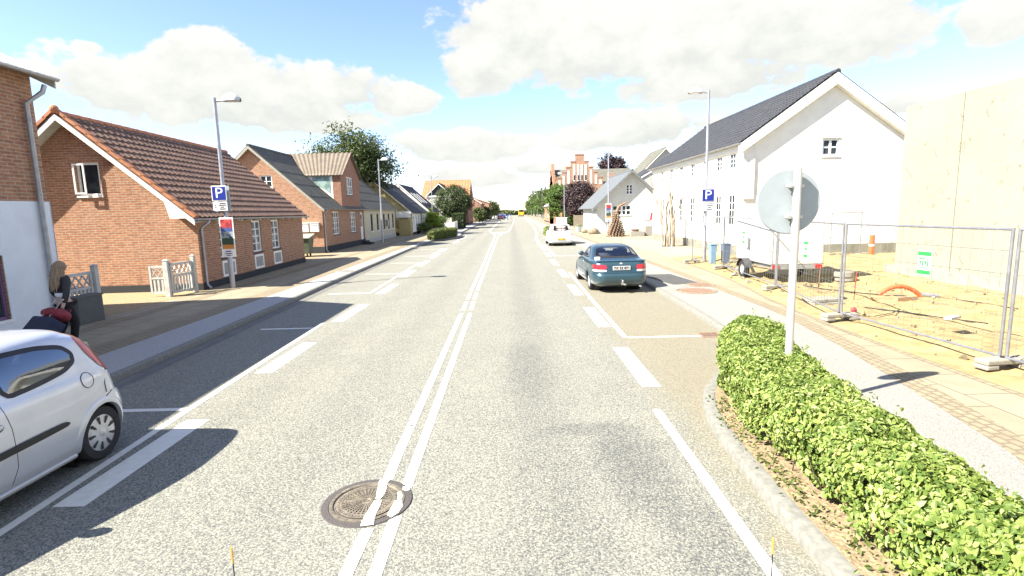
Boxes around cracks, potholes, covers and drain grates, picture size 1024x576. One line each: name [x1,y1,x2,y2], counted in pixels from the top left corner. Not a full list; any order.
manhole cover [320,479,413,528]
